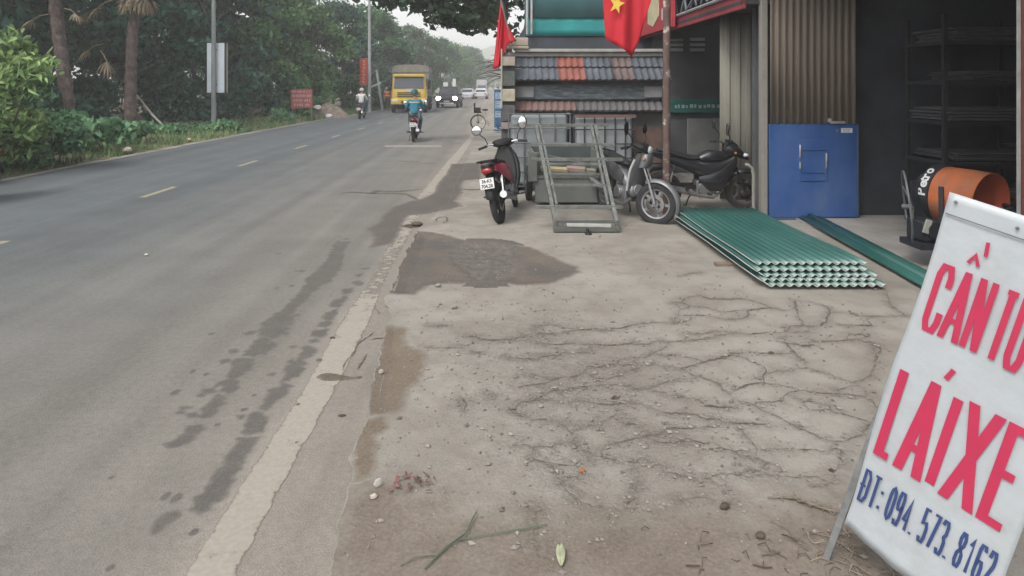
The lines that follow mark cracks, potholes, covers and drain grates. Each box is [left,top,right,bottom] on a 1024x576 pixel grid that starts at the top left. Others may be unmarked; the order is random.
crack [474,292,905,511]
crack [345,189,418,200]
